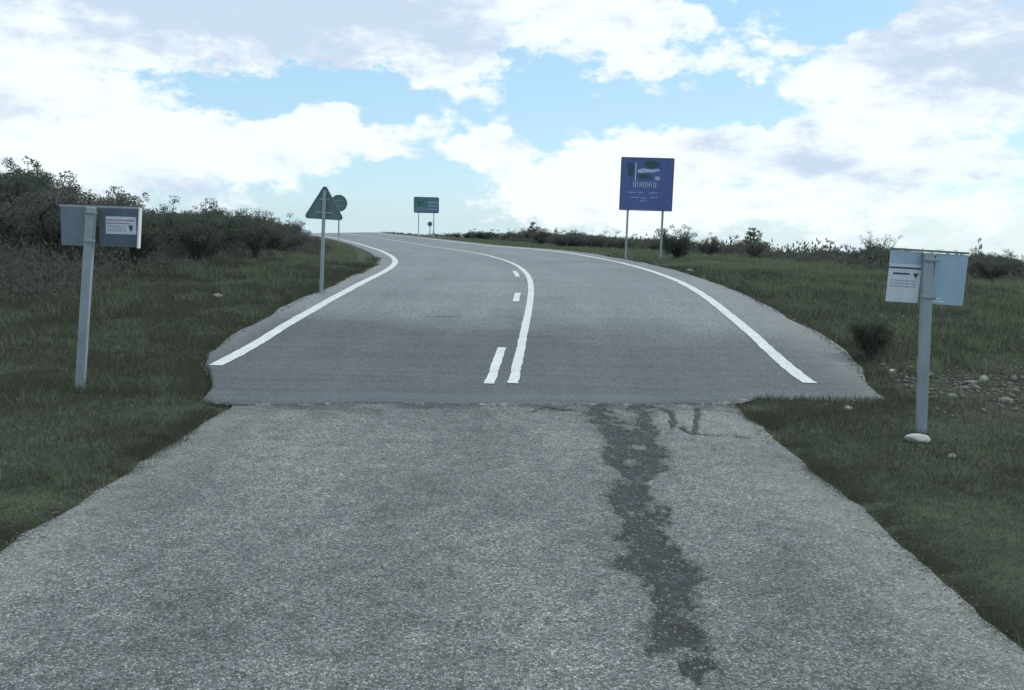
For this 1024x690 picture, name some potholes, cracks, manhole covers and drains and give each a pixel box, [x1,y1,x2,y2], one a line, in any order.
crack [587,405,746,686]
